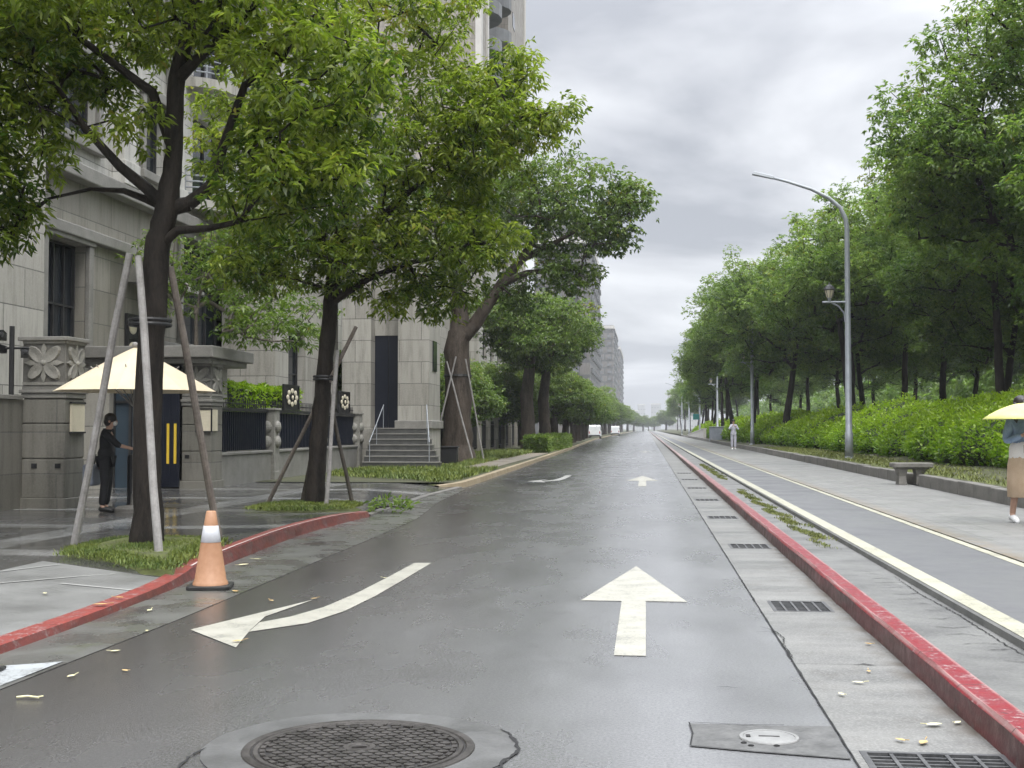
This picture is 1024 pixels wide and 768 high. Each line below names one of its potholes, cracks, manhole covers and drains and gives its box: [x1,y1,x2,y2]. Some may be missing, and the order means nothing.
drain grate [859,751,1017,768]
manhole cover [200,713,518,768]
manhole cover [689,722,851,759]
drain grate [767,601,835,612]
